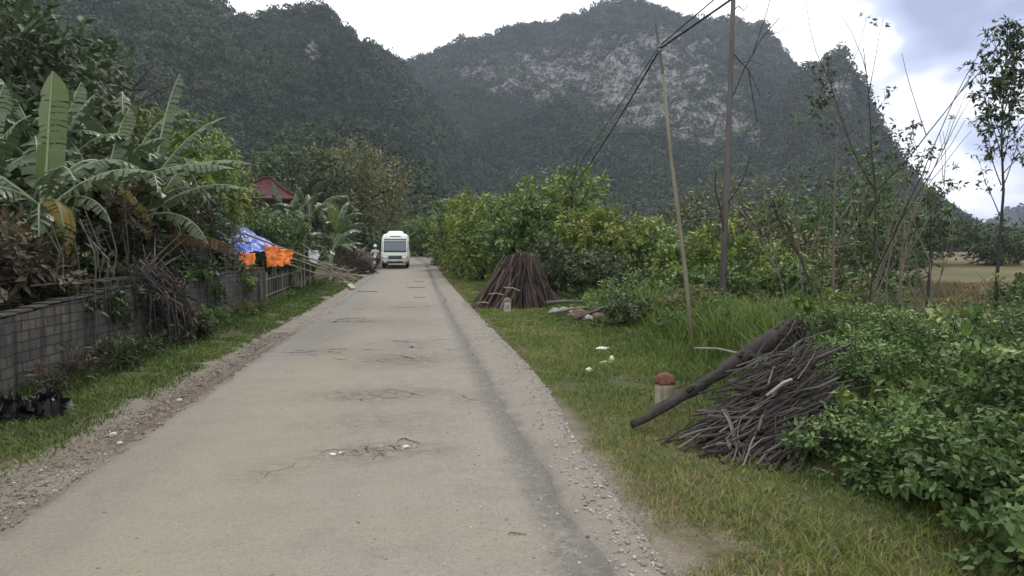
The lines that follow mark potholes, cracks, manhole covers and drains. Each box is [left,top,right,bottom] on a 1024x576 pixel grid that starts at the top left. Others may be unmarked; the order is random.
pothole [323,449,347,457]
pothole [396,438,420,450]
